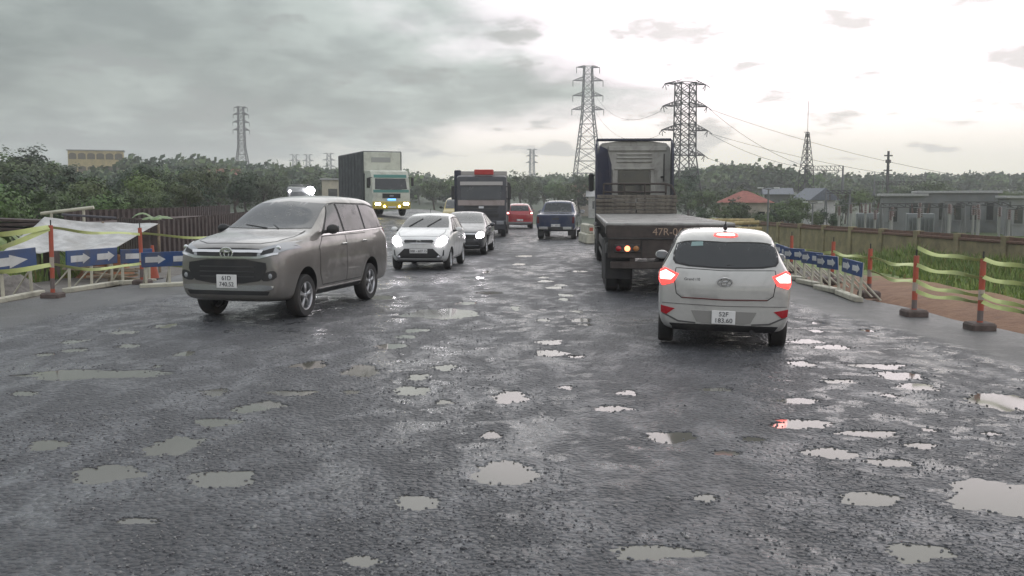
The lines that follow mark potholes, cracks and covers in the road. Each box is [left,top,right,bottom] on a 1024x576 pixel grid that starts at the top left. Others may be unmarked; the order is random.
pothole [458,457,552,486]
pothole [640,429,702,444]
pothole [828,487,919,507]
pothole [790,444,863,462]
pothole [4,366,182,381]
pothole [177,466,270,491]
pothole [486,387,534,408]
pothole [395,306,487,320]
pothole [338,552,393,570]
pothole [592,541,728,564]
pothole [386,492,442,511]
pothole [757,417,844,430]
